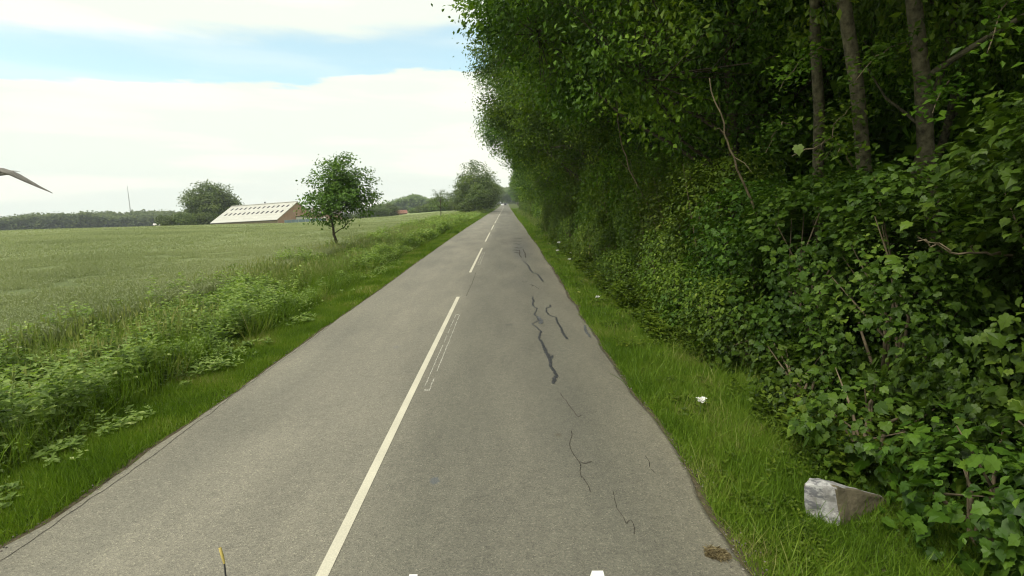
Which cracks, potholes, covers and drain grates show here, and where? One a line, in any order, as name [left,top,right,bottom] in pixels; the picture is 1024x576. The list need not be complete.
crack [560,393,592,492]
